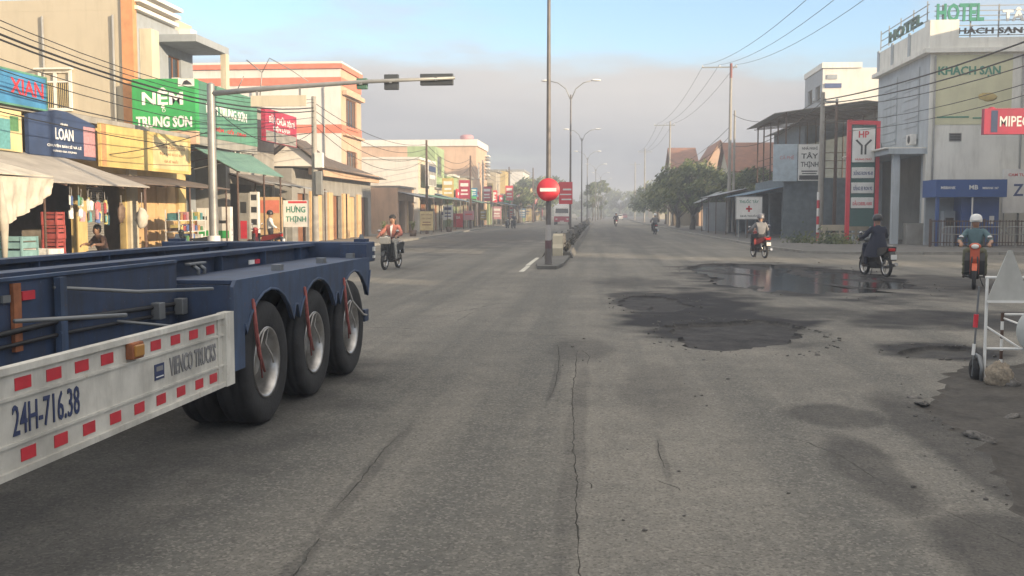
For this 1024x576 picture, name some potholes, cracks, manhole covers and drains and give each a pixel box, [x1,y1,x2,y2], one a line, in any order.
pothole [897,346,980,358]
crack [548,335,592,576]
pothole [684,263,916,294]
pothole [662,319,807,351]
crack [291,439,395,576]
pothole [617,296,695,312]
